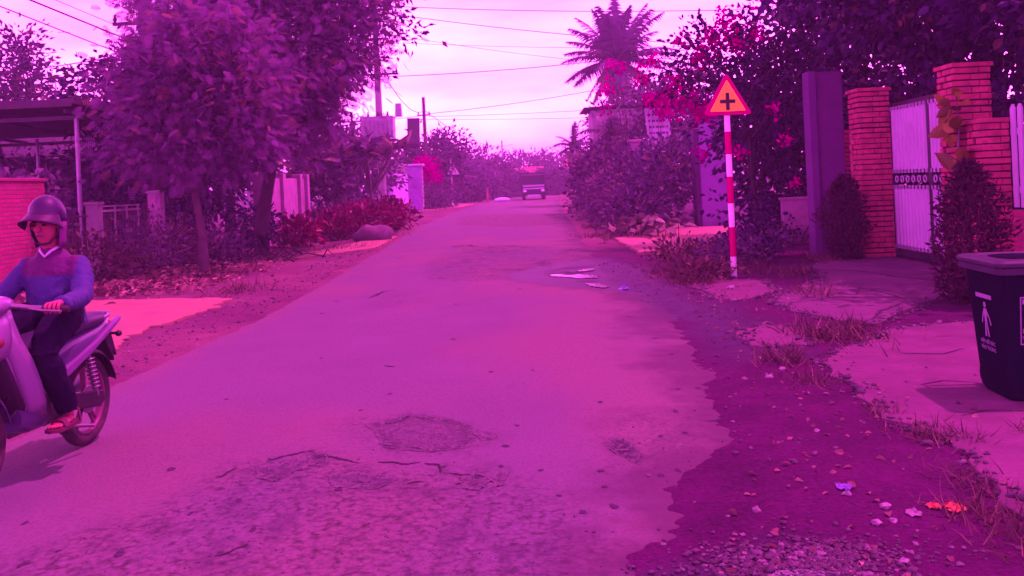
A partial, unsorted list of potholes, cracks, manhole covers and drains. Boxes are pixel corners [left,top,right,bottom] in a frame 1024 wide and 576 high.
pothole [366,414,475,452]
crack [353,444,485,485]
pothole [605,437,643,465]
